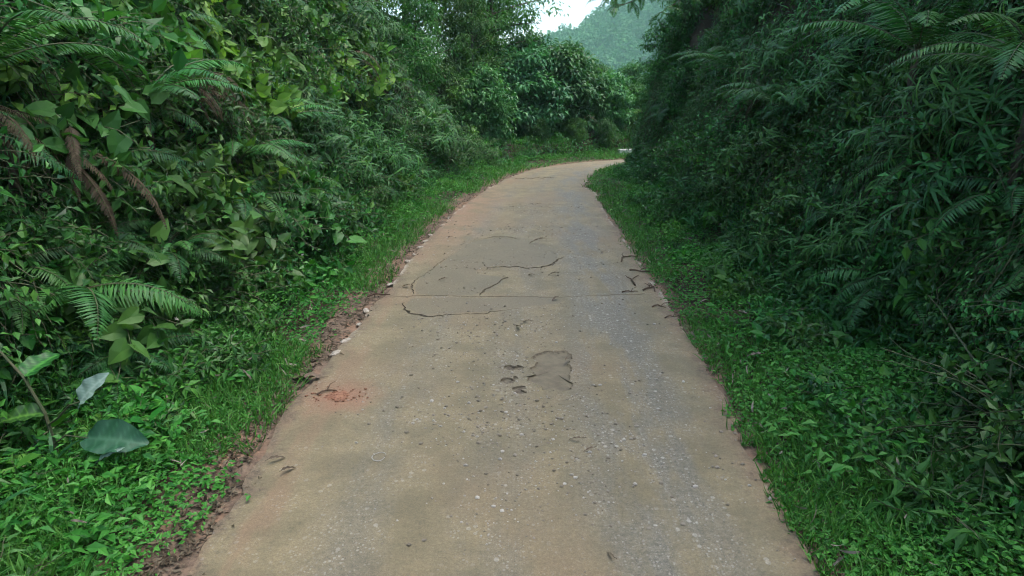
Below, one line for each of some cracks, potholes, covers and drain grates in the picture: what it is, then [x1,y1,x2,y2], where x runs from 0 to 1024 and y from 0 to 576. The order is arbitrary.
crack [401,257,640,317]
pothole [527,351,573,392]
